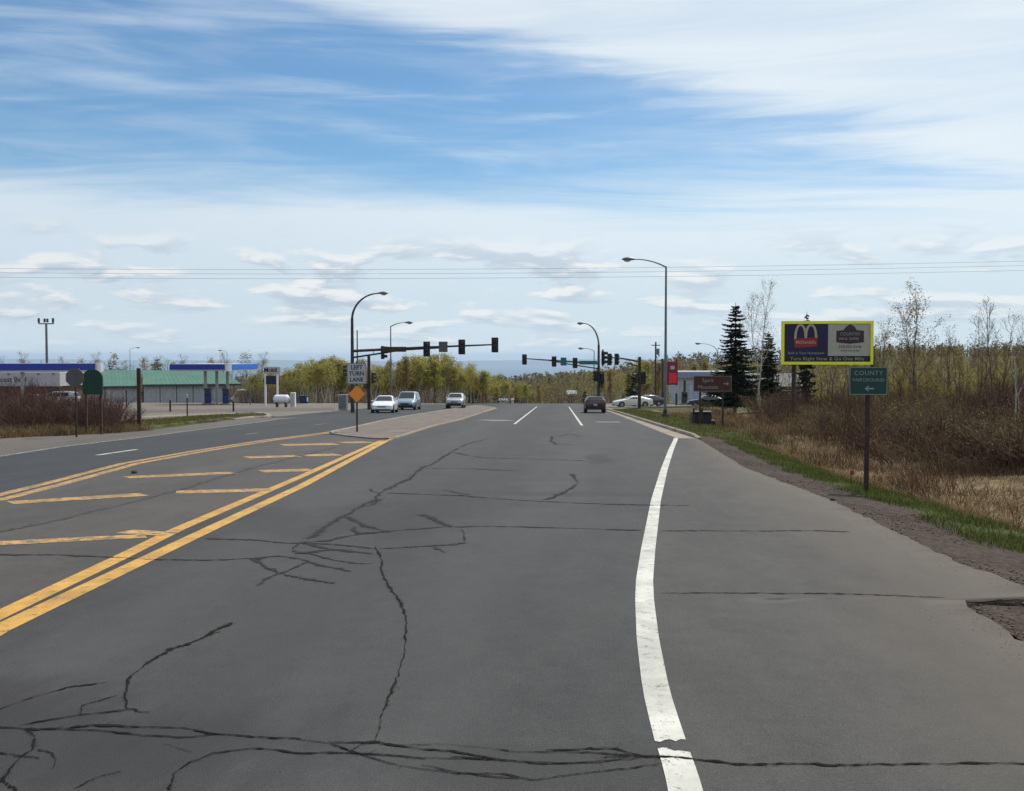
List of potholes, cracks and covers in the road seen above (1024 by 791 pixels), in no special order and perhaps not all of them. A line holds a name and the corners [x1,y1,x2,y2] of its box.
crack [0,434,1024,791]
pothole [966,599,1024,640]
